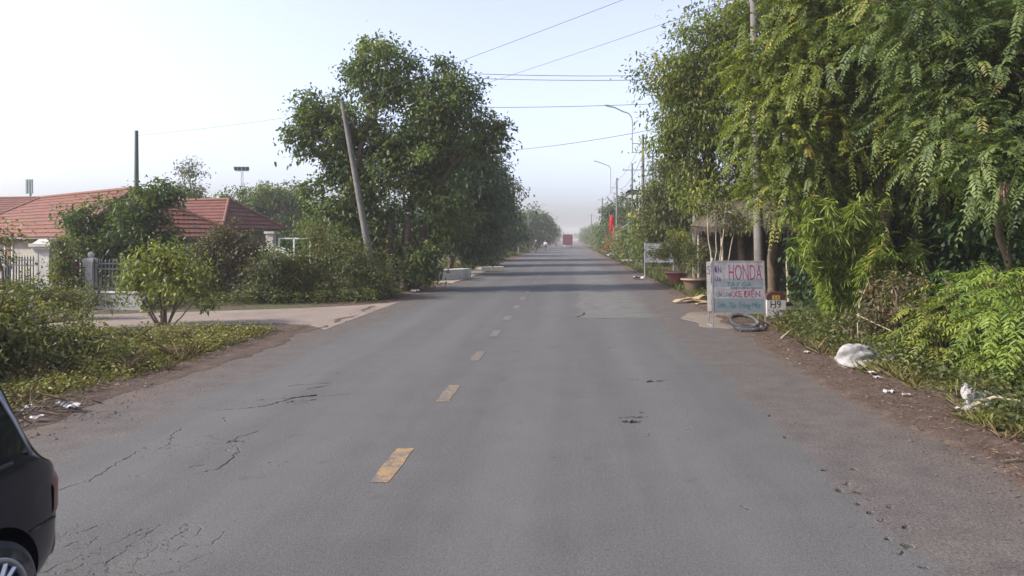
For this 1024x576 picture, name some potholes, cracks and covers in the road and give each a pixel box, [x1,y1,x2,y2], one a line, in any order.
crack [38,522,229,576]
pothole [898,542,919,552]
crack [58,373,355,491]
